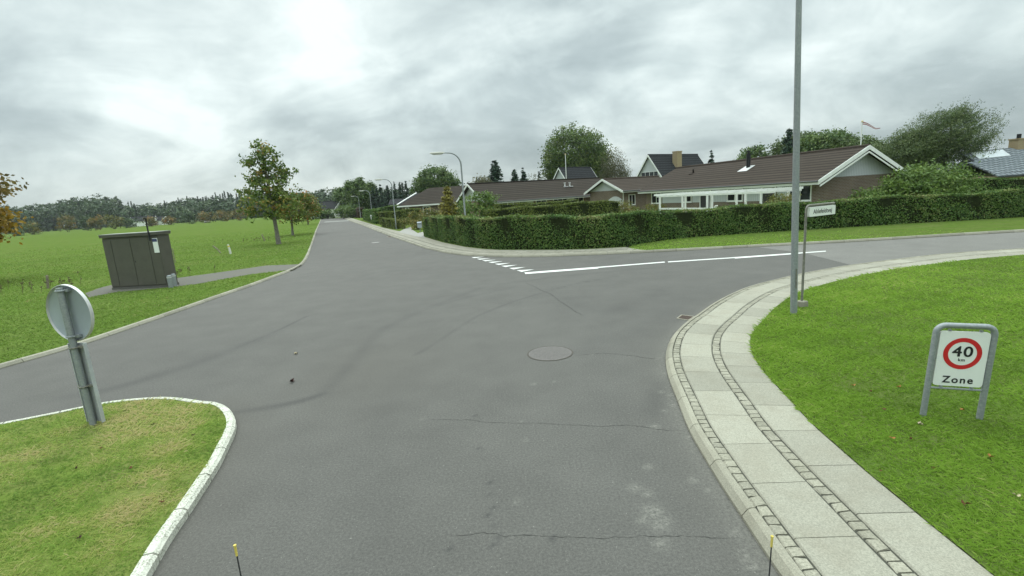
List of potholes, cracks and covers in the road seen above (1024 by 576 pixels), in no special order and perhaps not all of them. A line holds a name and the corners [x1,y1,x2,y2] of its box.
manhole cover [527,346,573,361]
